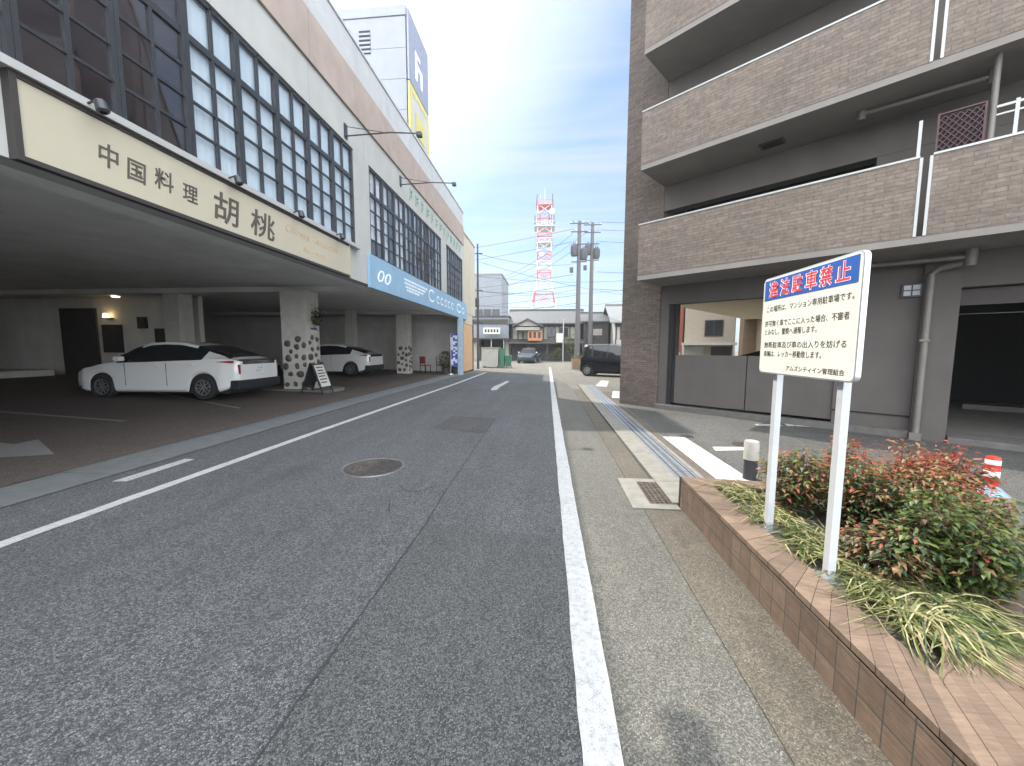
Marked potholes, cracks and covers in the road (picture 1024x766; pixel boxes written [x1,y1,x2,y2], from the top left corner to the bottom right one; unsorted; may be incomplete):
manhole cover [340,458,406,478]
drain grate [617,478,681,511]
